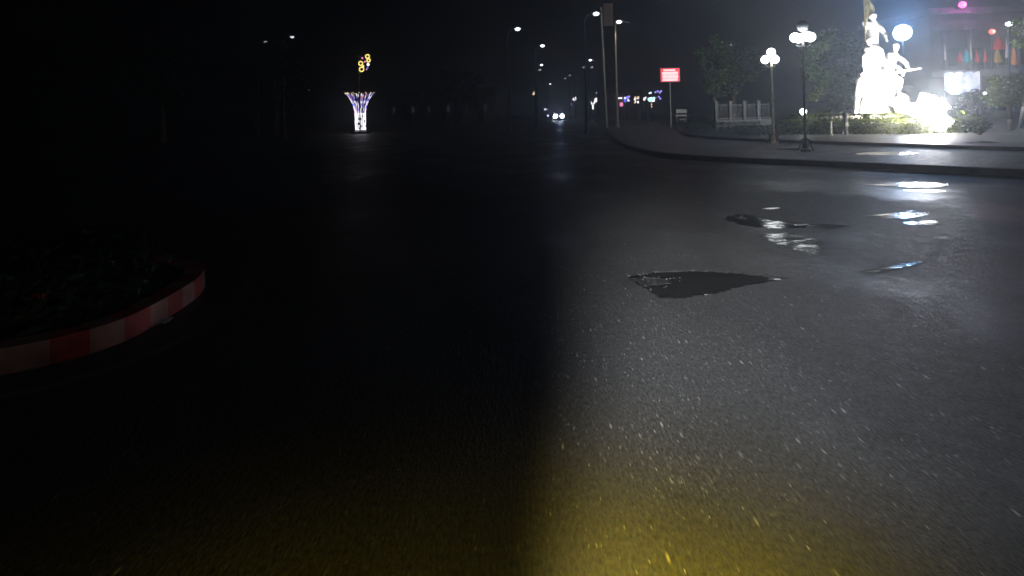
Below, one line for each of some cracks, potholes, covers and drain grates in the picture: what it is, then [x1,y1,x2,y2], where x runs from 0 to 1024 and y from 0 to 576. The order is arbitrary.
pothole [722,213,810,228]
pothole [624,270,787,299]
